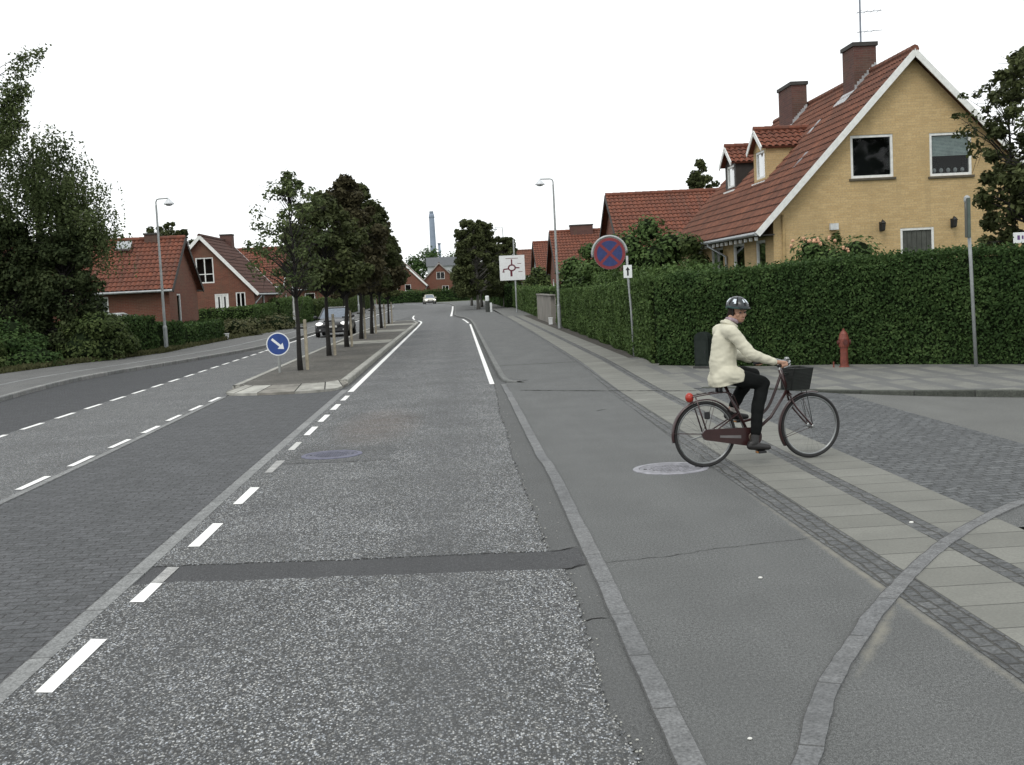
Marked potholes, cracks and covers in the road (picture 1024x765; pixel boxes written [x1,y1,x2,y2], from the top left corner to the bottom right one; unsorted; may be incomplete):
manhole cover [633,462,709,475]
manhole cover [301,450,362,459]
